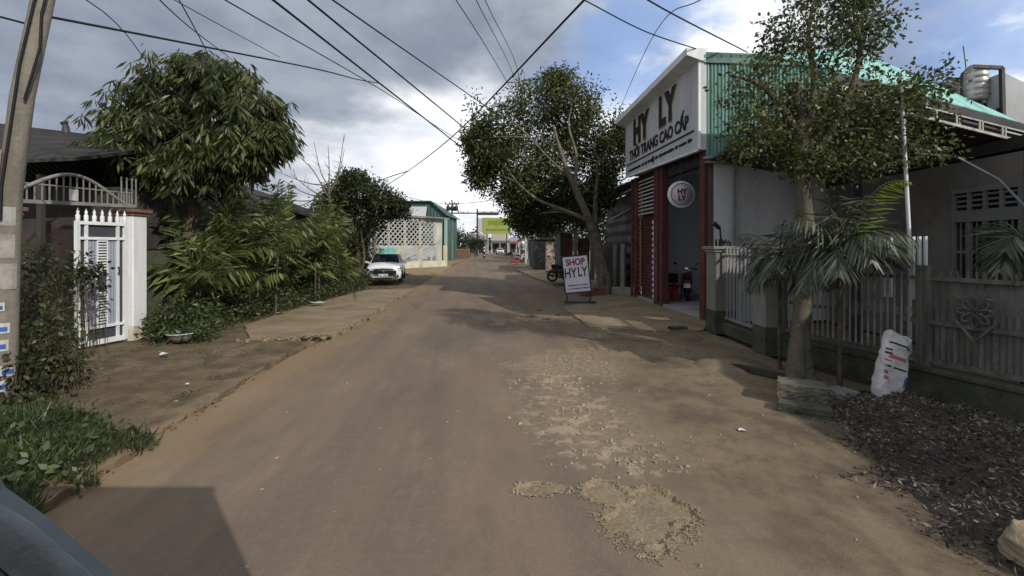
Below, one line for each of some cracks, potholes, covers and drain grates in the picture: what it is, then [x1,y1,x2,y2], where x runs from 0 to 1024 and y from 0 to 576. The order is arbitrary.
pothole [510,480,574,498]
pothole [575,475,706,568]
